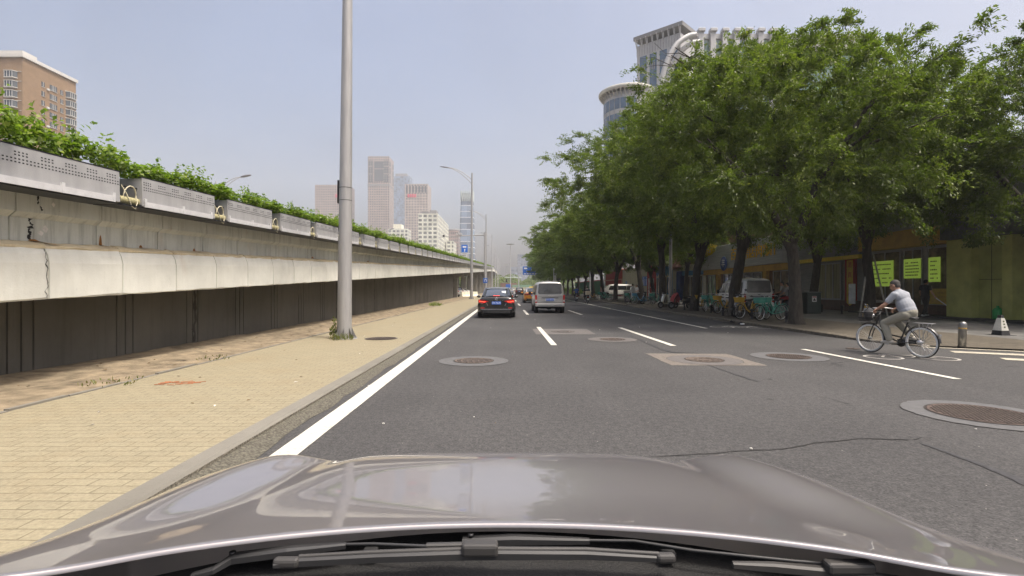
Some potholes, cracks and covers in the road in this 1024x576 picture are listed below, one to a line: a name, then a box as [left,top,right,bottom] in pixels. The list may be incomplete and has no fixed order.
manhole cover [438,356,509,366]
manhole cover [900,399,1024,431]
manhole cover [749,352,830,361]
crack [651,437,938,457]
manhole cover [645,353,768,366]
